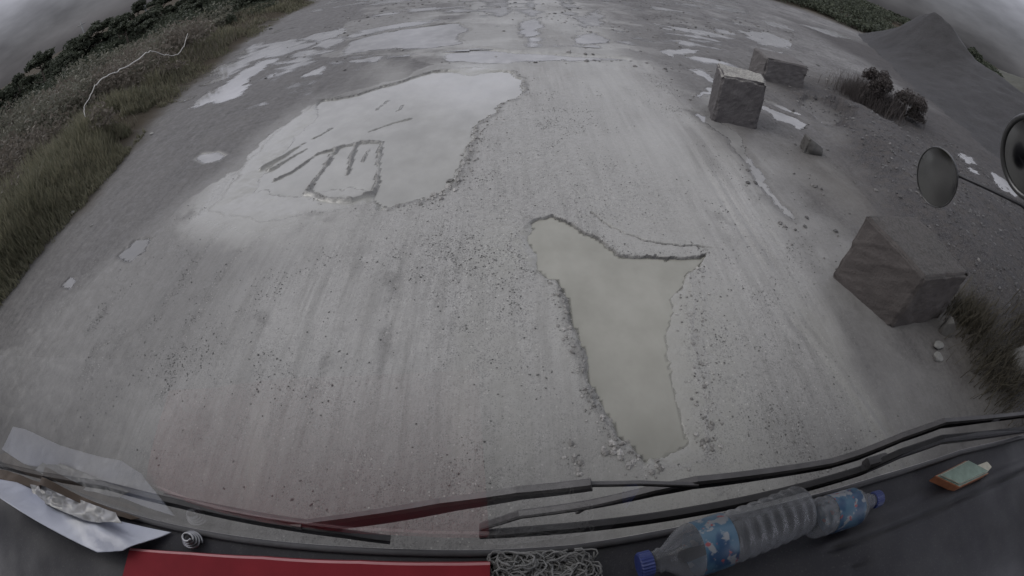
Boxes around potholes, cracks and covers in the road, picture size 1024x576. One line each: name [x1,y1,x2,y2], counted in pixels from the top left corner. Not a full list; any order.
pothole [191,149,231,165]
crack [589,211,717,250]
pothole [208,66,527,222]
pothole [337,22,474,58]
pothole [508,214,711,469]
